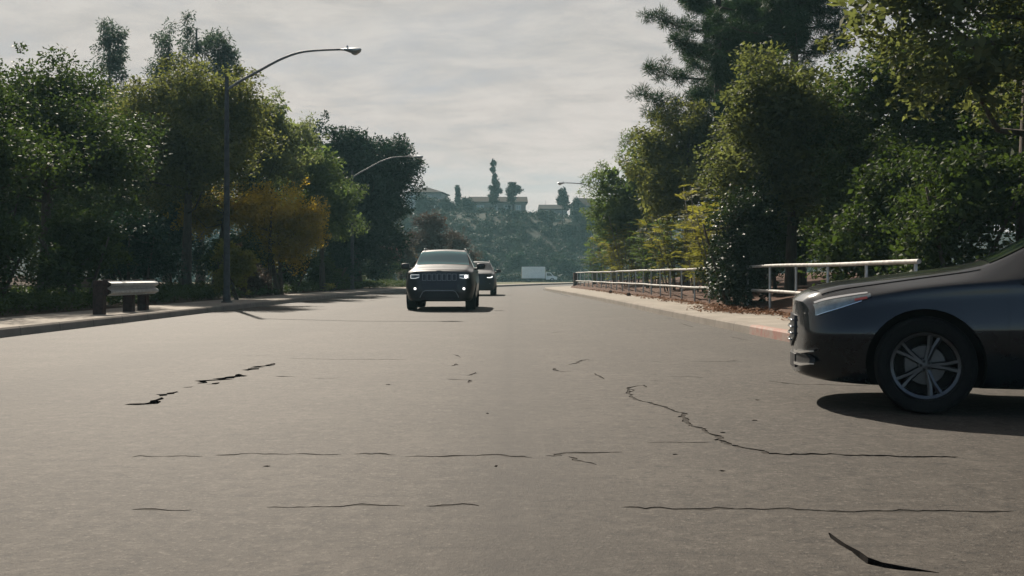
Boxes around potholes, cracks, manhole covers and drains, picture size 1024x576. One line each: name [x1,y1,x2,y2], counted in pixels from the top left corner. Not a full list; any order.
crack [132,503,478,511]
crack [829,533,938,573]
crack [626,385,956,458]
crack [125,355,291,405]
crack [134,452,611,465]
